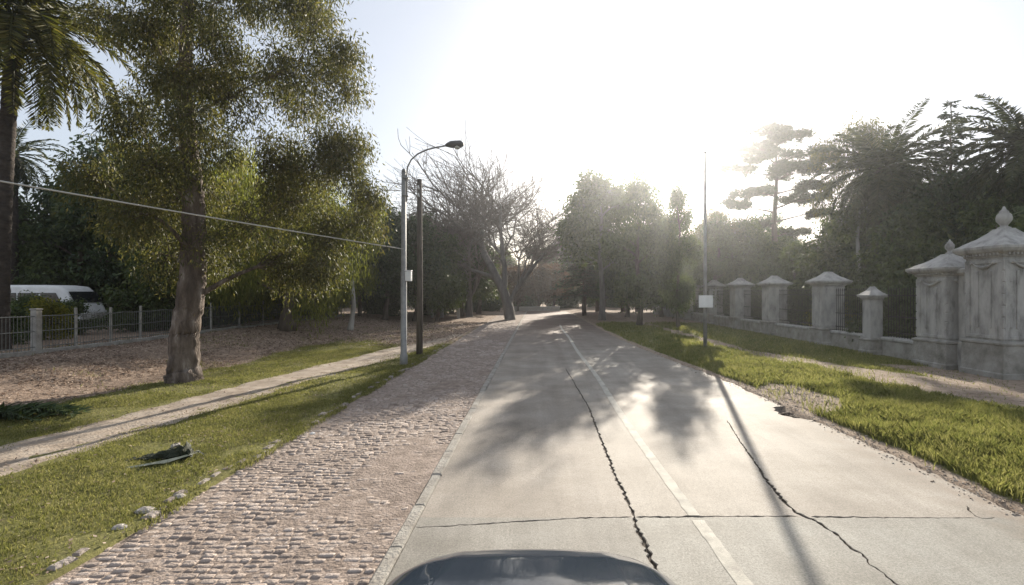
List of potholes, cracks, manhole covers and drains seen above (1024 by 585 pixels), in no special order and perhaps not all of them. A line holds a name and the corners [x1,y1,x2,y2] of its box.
crack [418,370,994,585]
pothole [773,406,823,421]
